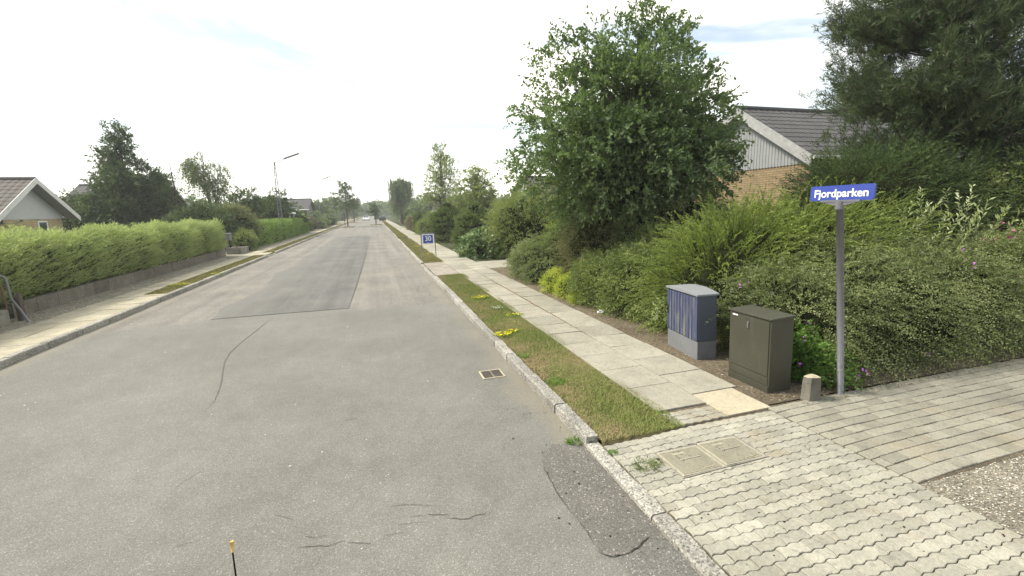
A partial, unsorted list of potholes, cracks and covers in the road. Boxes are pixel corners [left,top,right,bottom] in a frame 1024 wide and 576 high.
manhole cover [697,436,765,466]
drain grate [479,369,506,380]
manhole cover [656,445,725,477]
crack [390,504,485,535]
